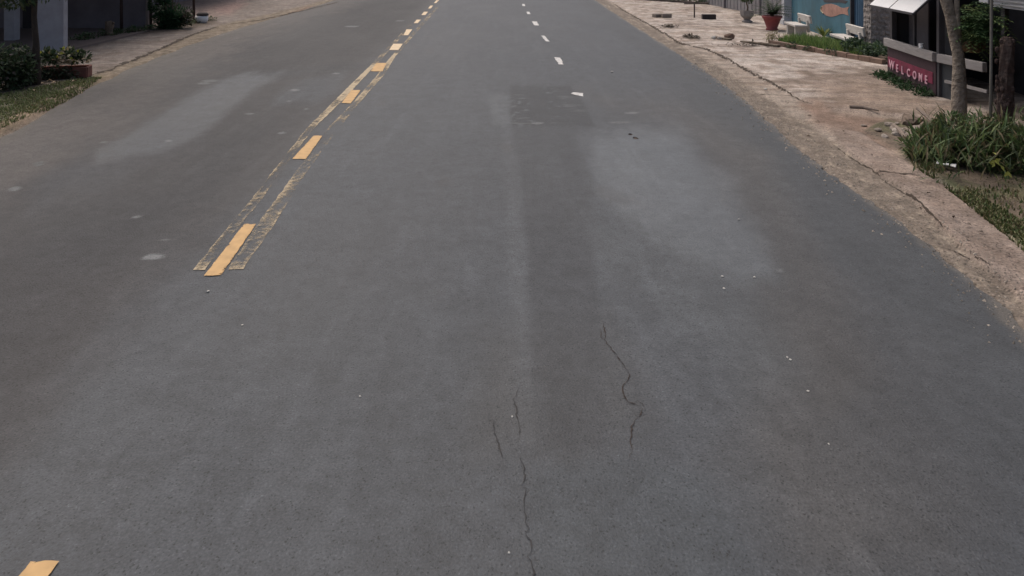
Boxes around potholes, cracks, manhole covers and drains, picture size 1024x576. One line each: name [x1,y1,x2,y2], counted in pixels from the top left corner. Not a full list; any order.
crack [520,459,536,576]
crack [489,390,520,457]
crack [832,144,946,230]
crack [601,324,645,456]
